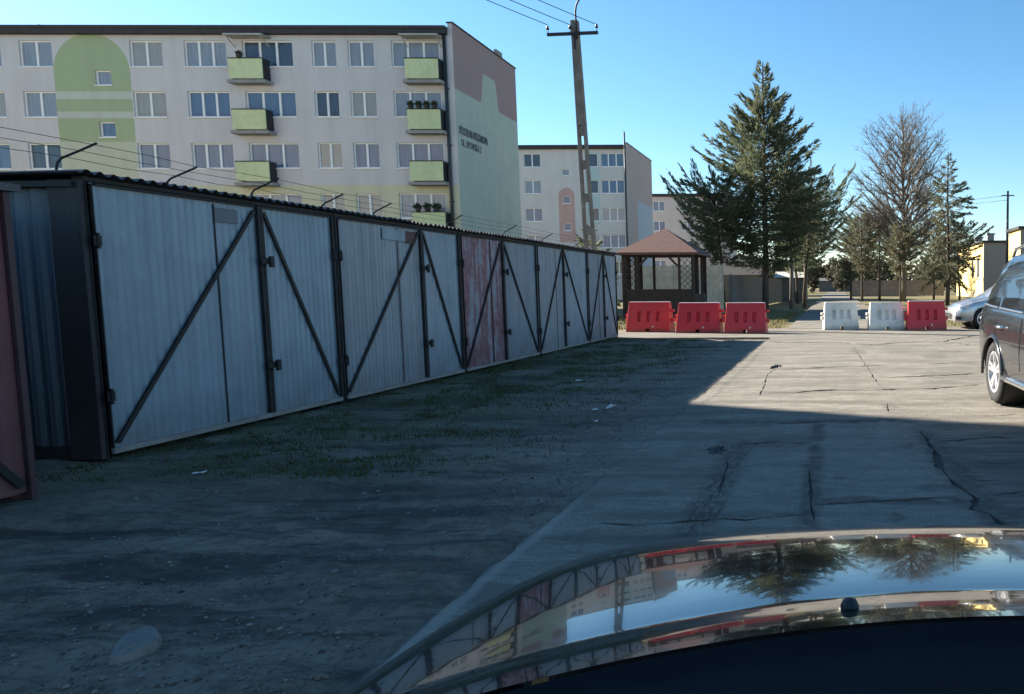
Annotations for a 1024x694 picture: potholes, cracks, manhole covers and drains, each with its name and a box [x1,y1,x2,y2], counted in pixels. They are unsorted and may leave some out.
crack [599,336,1023,528]
